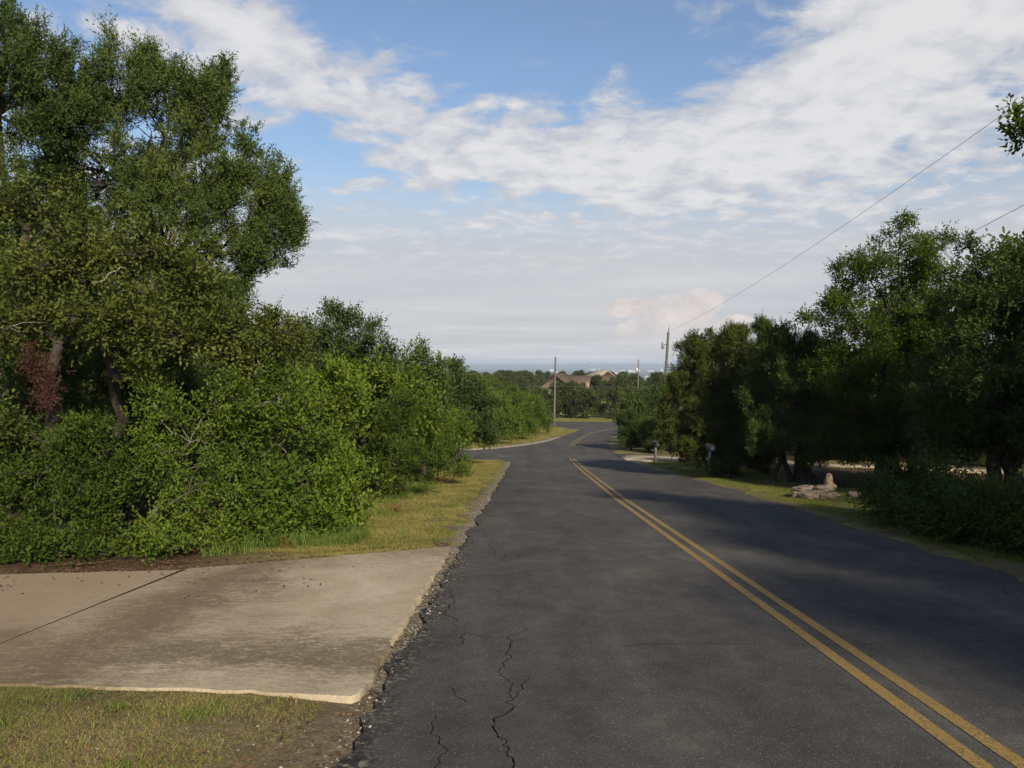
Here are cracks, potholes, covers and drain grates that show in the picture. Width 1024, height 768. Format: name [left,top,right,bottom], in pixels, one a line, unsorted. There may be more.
crack [425,579,538,768]
